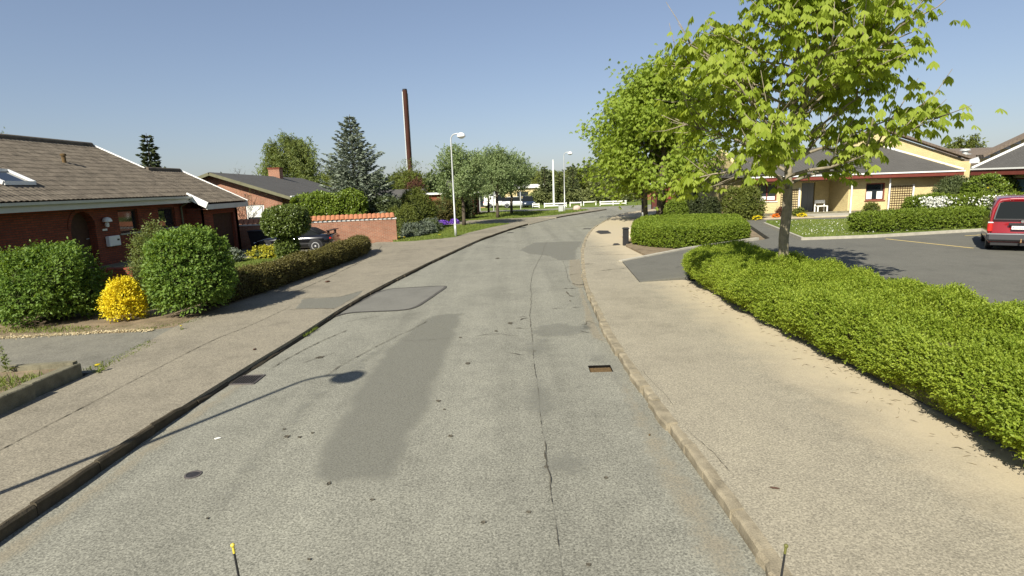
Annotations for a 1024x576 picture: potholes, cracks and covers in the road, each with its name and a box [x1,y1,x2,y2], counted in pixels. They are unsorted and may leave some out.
drain grate [228,374,266,385]
